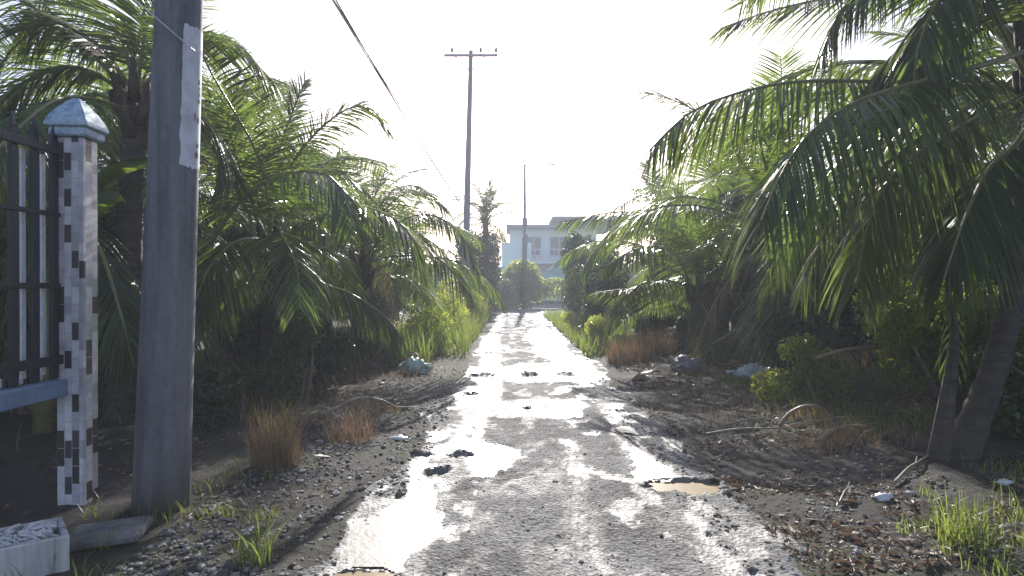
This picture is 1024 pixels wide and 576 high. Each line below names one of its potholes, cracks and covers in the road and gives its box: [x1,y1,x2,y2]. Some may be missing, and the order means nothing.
pothole [637,477,734,495]
pothole [445,449,475,459]
pothole [331,568,401,576]
pothole [423,465,453,477]
